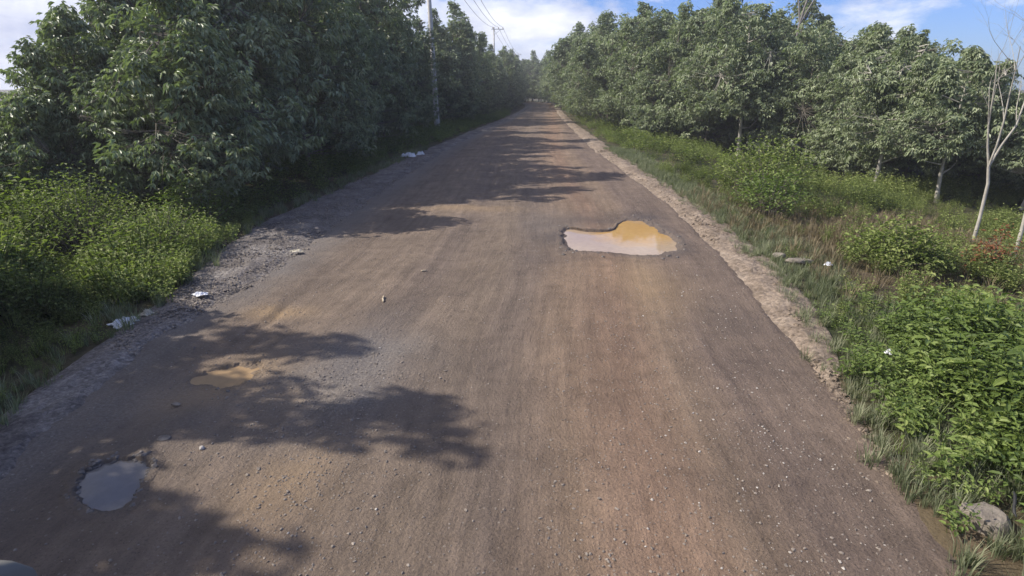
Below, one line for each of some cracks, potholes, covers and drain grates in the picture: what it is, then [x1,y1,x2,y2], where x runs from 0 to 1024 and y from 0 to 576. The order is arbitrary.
pothole [58,449,166,525]
pothole [175,357,274,397]
pothole [544,214,699,261]
